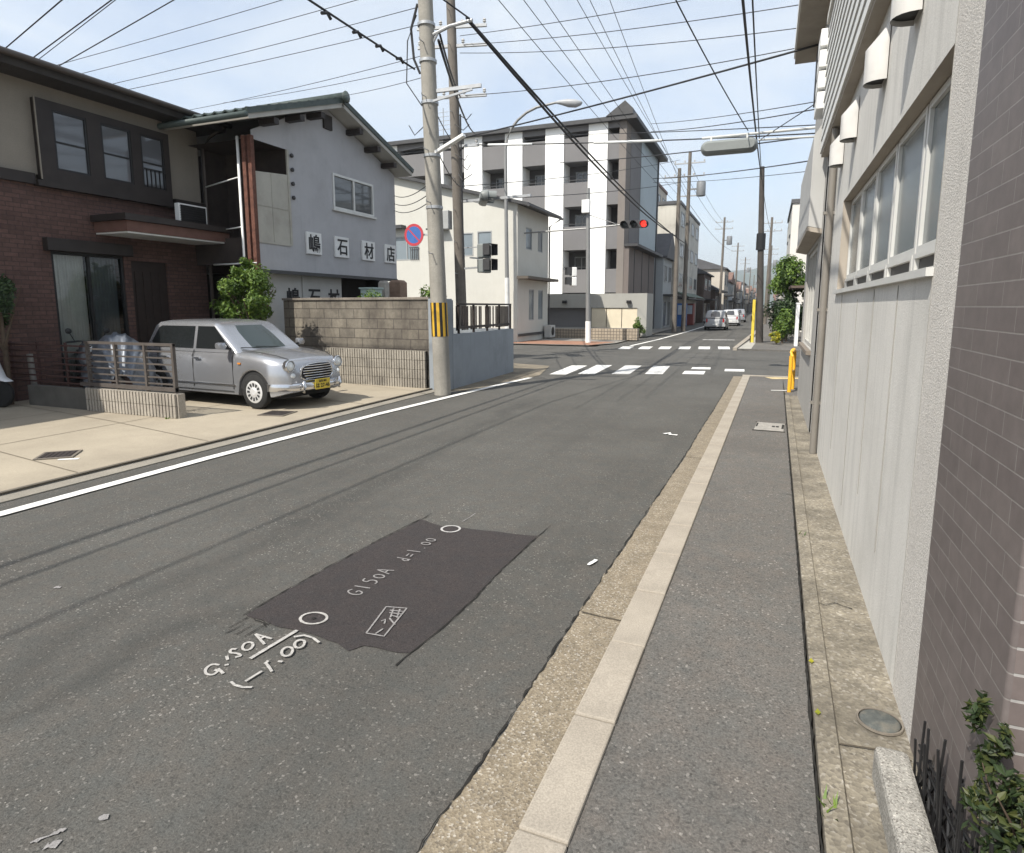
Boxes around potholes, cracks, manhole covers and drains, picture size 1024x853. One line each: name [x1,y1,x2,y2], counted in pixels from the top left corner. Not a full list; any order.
manhole cover [752,422,785,432]
manhole cover [856,707,904,736]
